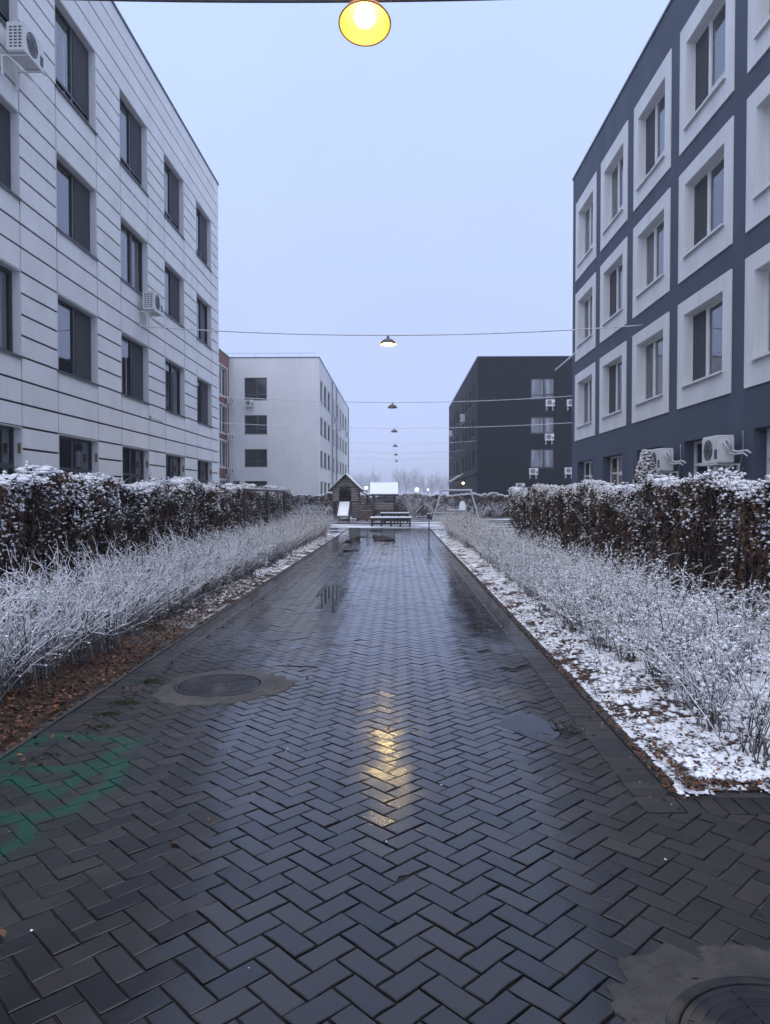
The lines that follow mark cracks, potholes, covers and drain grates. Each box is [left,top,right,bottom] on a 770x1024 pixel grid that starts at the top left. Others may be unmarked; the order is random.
manhole cover [150,670,297,707]
manhole cover [606,941,770,1024]
